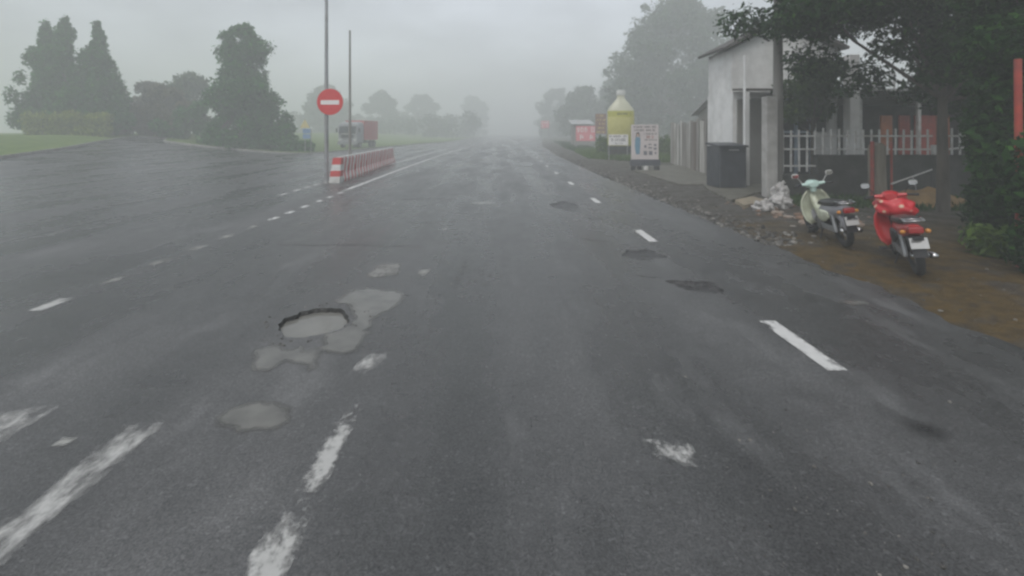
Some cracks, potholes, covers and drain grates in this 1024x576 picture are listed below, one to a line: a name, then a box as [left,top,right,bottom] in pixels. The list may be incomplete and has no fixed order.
pothole [622,249,668,261]
pothole [549,201,578,212]
pothole [278,308,350,338]
pothole [665,280,724,294]
